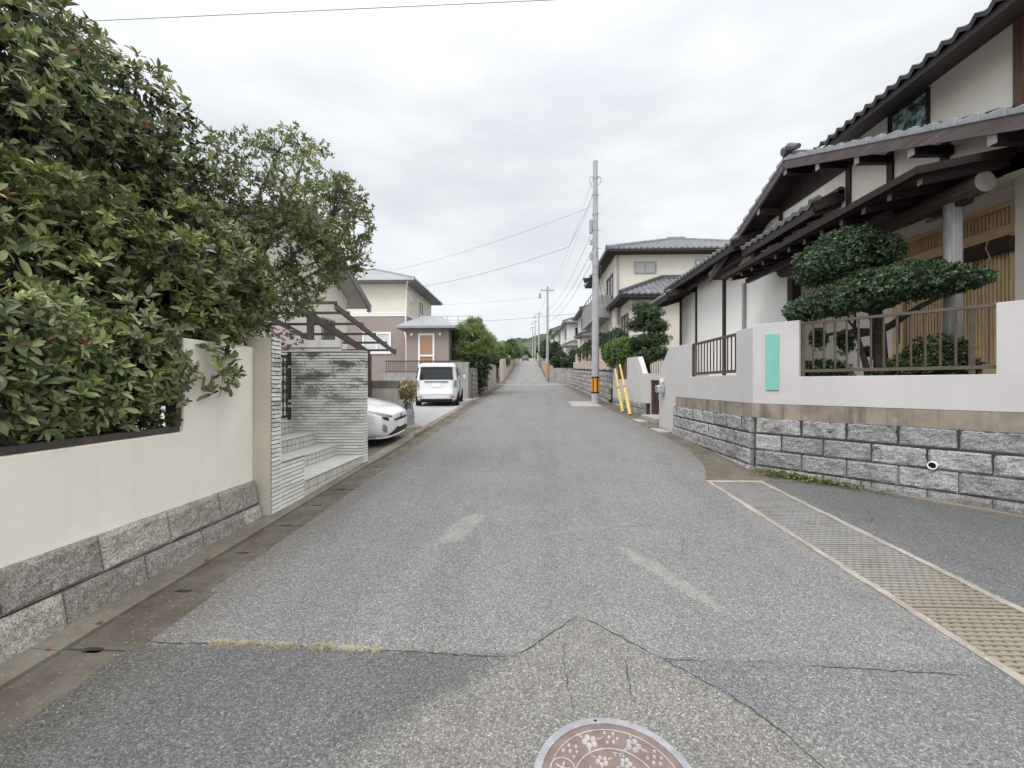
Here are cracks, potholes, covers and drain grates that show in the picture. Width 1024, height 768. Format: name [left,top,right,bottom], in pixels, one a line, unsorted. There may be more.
drain grate [705,480,1024,687]
crack [513,603,825,768]
manhole cover [534,717,692,768]
